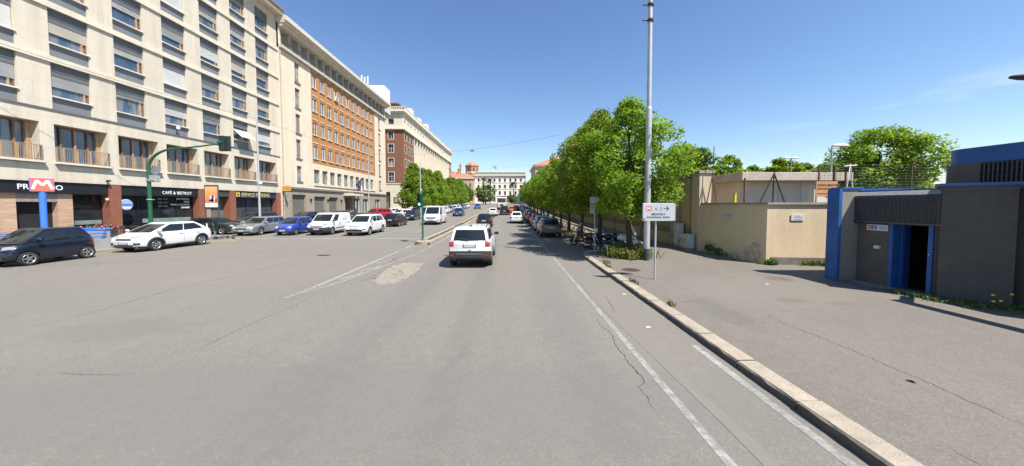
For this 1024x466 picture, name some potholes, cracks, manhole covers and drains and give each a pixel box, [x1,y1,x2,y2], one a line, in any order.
crack [597,297,655,411]
crack [771,316,1021,424]
